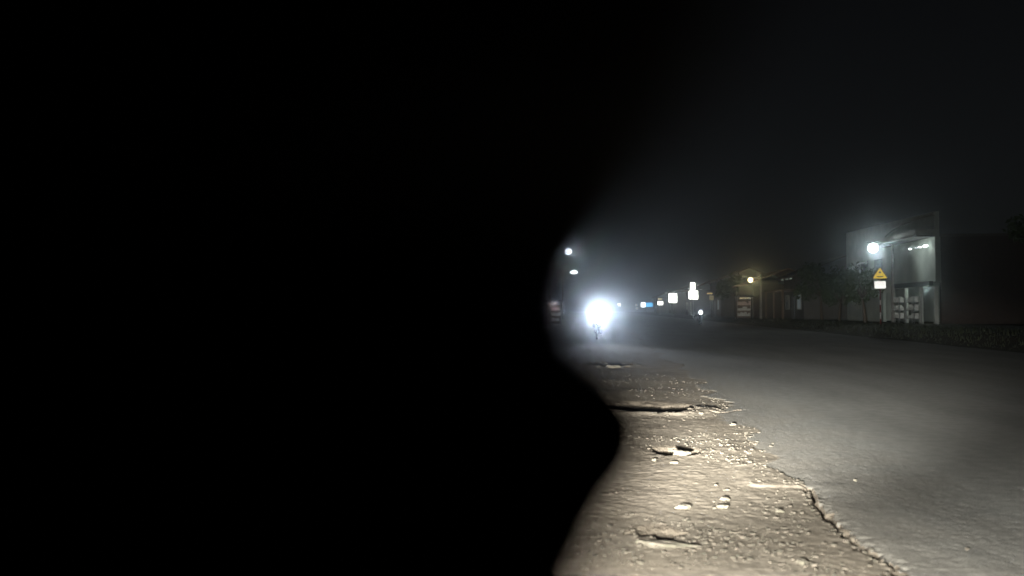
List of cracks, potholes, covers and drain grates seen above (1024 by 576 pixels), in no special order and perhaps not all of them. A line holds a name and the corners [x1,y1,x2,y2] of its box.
pothole [623,524,692,541]
crack [802,485,909,576]
pothole [660,445,705,456]
pothole [655,400,701,413]
